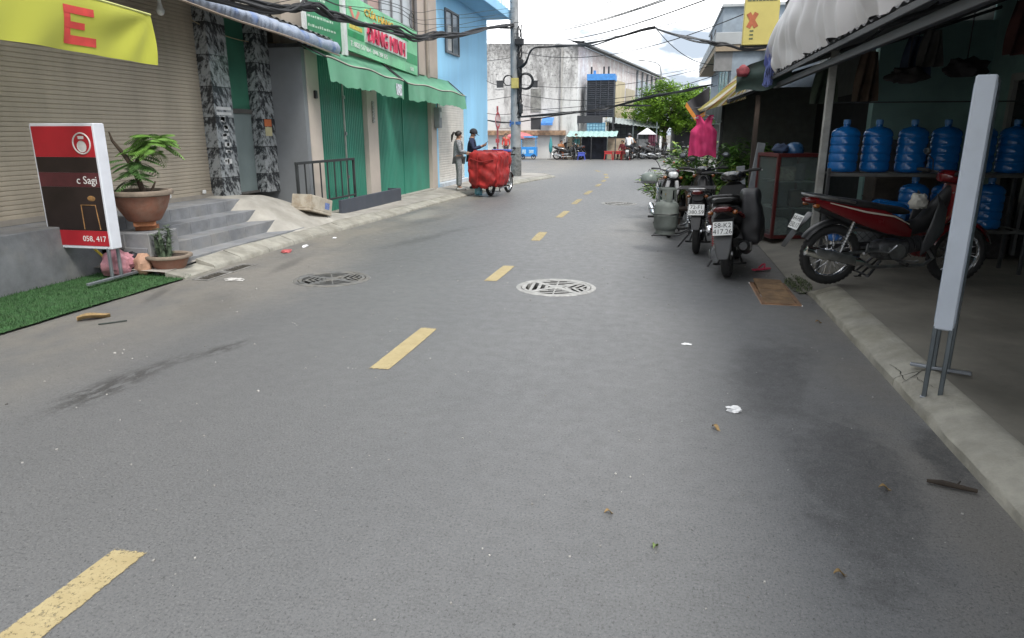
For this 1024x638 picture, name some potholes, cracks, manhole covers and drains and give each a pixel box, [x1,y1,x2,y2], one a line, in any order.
drain grate [192,264,257,281]
manhole cover [293,271,370,287]
manhole cover [516,279,596,297]
